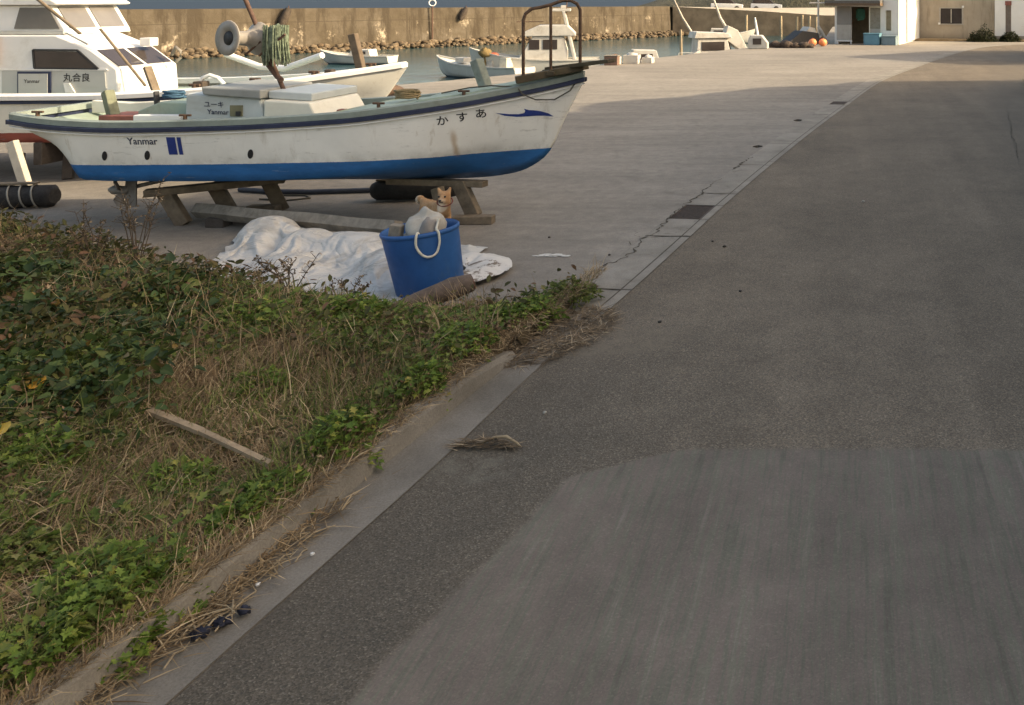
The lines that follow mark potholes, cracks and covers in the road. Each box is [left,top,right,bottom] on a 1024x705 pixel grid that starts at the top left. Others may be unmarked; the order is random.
crack [592,184,712,290]
drain grate [668,205,715,220]
